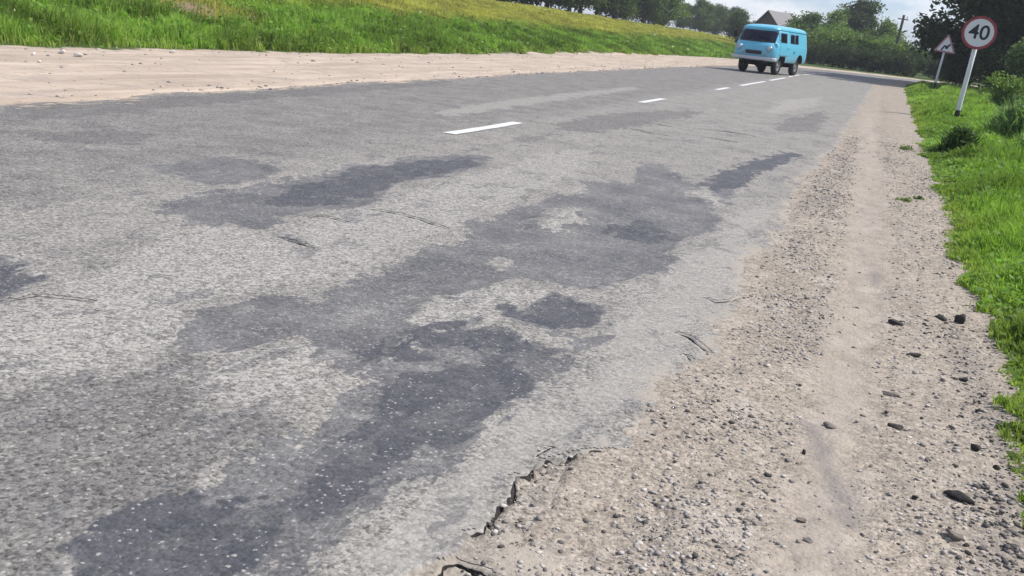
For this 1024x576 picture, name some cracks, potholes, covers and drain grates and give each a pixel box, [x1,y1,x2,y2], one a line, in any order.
crack [673,331,714,364]
crack [370,209,451,230]
crack [1,293,97,304]
crack [276,215,348,248]
crack [702,295,742,304]
